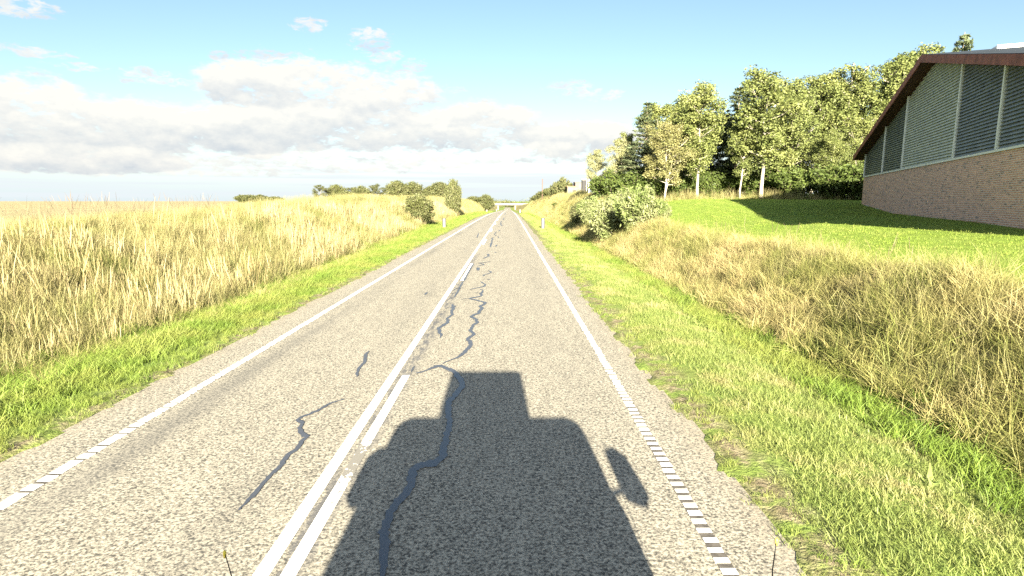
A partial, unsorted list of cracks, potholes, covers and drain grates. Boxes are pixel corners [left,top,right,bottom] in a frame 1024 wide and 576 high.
crack [437,218,504,338]
